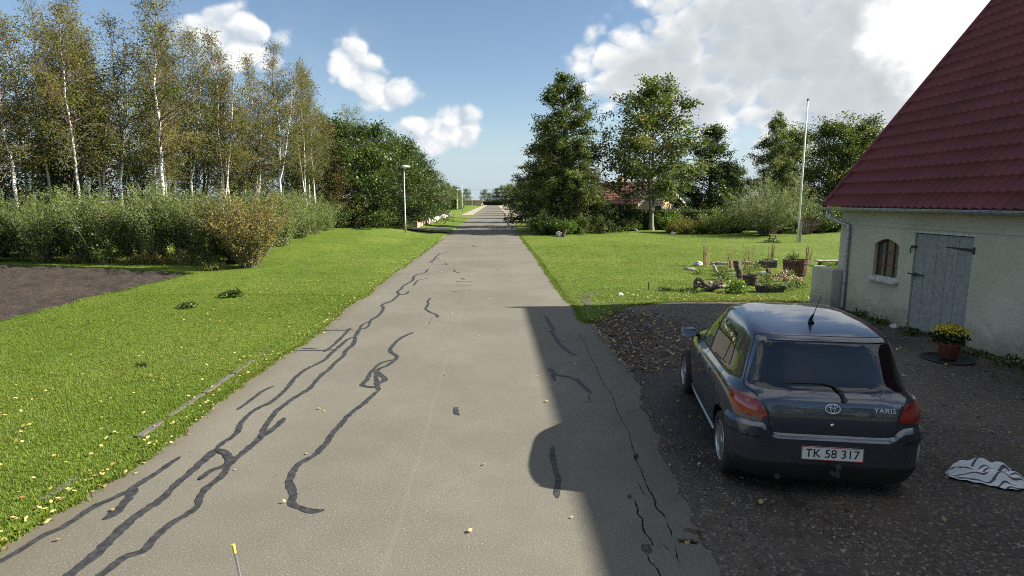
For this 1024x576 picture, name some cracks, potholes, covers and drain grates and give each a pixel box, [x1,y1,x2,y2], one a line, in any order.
crack [578,333,682,576]
